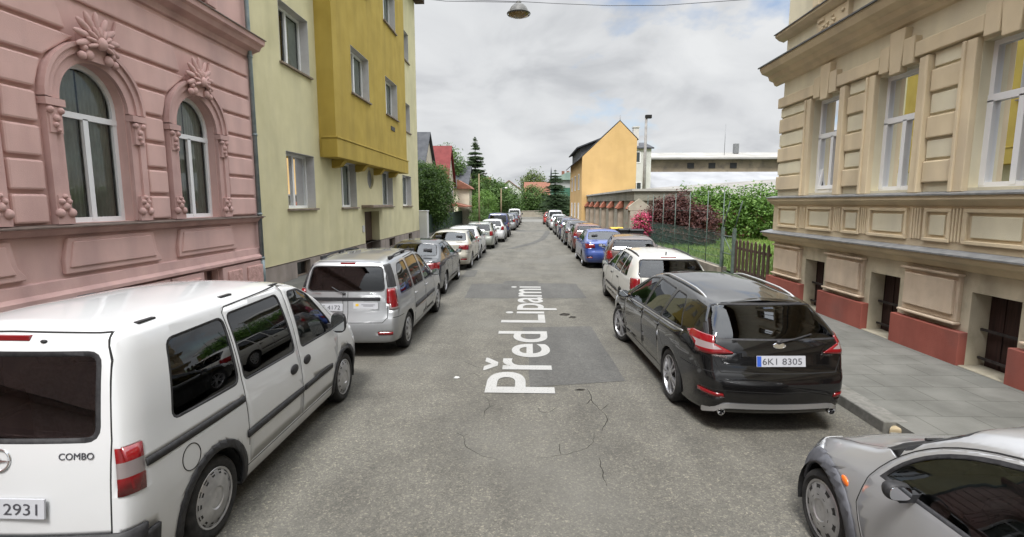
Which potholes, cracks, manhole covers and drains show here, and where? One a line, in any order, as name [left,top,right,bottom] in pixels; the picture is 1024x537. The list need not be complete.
crack [543,389,609,486]
